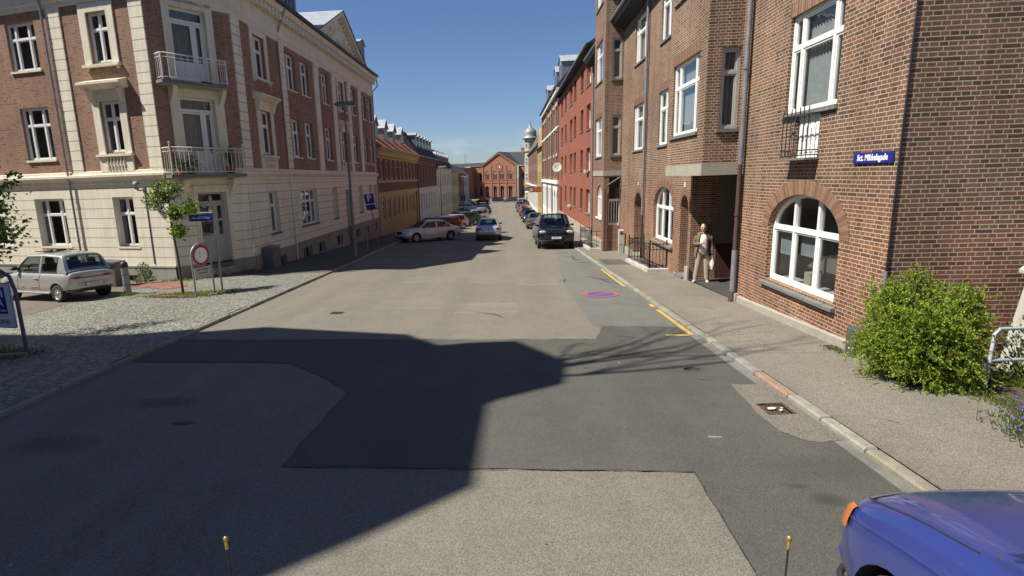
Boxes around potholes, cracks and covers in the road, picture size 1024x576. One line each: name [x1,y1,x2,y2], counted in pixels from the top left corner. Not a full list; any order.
drain grate [756,403,797,415]
